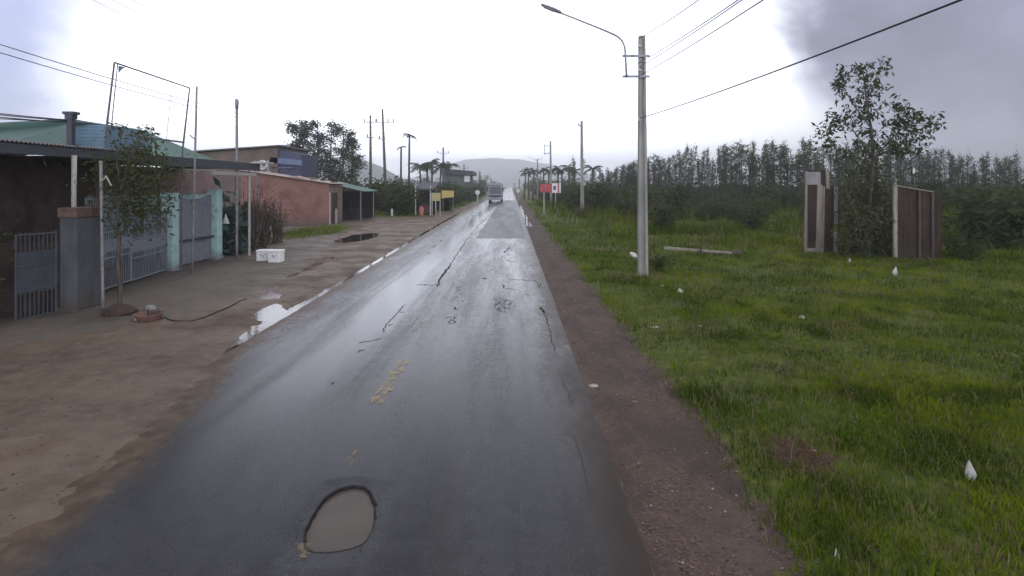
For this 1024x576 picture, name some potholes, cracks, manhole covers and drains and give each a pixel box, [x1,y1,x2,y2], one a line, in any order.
pothole [295,486,378,553]
